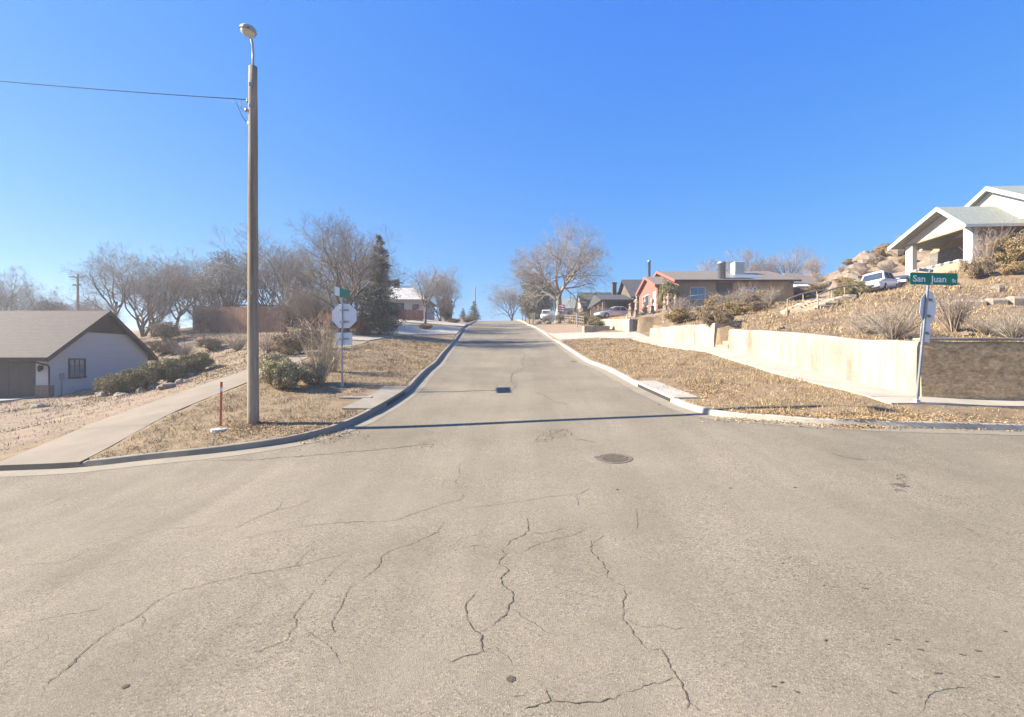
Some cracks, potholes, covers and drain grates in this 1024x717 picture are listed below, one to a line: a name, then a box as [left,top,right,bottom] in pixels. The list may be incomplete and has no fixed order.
manhole cover [596,453,633,464]
crack [41,485,698,709]
